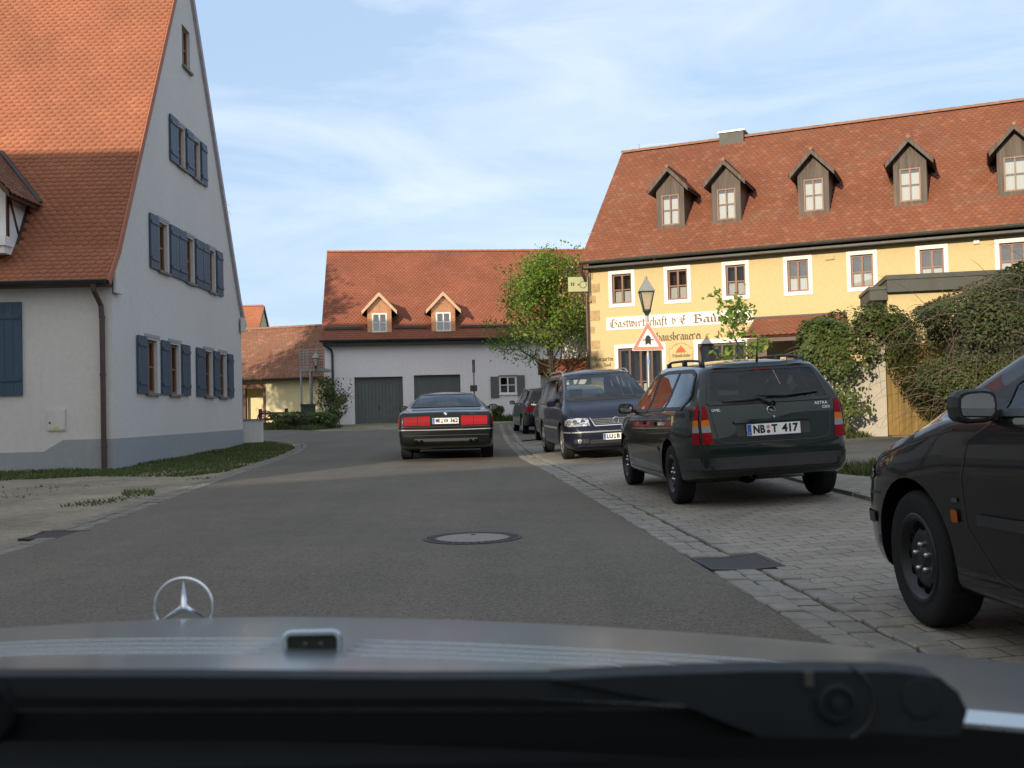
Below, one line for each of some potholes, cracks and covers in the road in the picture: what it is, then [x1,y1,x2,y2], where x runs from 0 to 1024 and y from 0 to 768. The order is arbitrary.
manhole cover [423,531,522,545]
